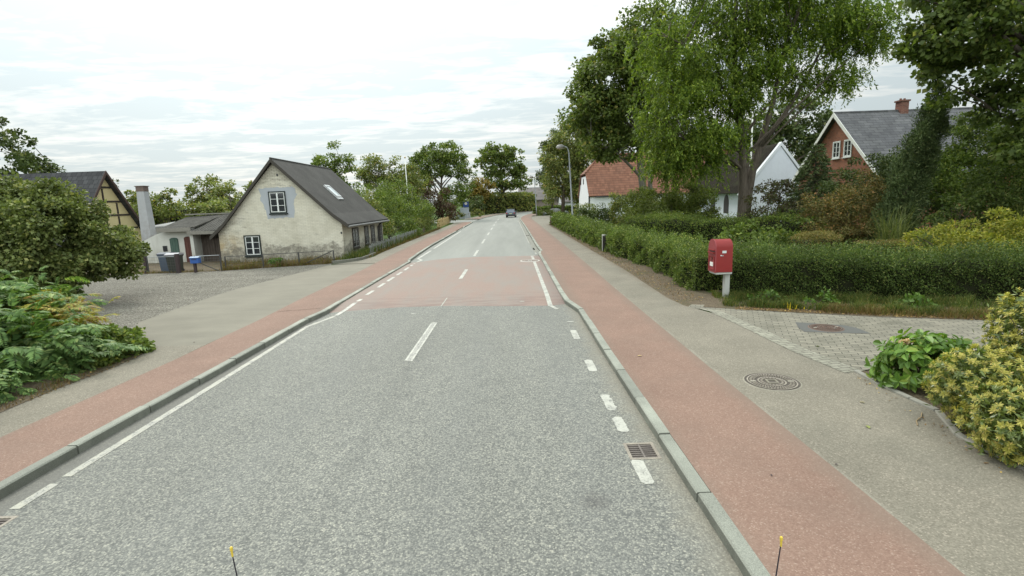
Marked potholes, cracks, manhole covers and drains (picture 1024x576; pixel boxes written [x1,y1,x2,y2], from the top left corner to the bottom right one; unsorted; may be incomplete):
manhole cover [808,324,845,332]
manhole cover [743,373,803,392]
drain grate [0,516,18,528]
drain grate [623,442,662,460]
